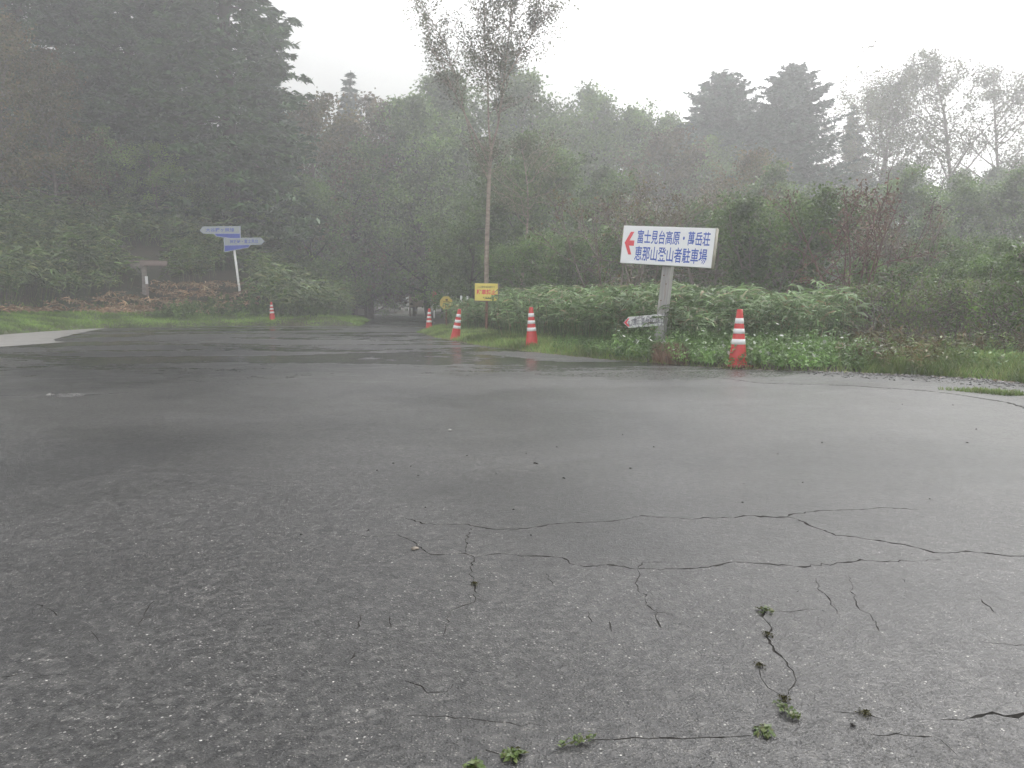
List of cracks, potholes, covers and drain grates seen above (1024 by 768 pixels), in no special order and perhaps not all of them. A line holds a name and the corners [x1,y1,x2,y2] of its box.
crack [836,711,1024,756]
crack [362,507,1012,703]
